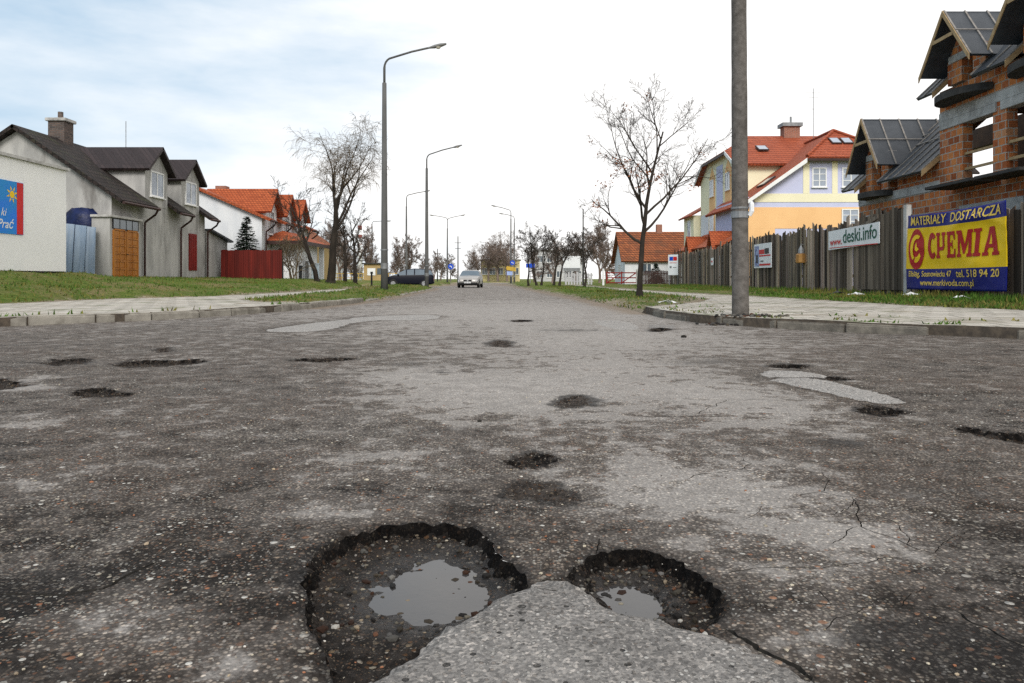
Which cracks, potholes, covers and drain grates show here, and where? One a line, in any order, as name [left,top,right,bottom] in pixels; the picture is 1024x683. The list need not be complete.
crack [688,445,984,573]
pothole [954,426,1024,444]
pothole [554,395,594,408]
pothole [300,522,528,683]
pothole [855,405,912,417]
pothole [500,451,561,470]
pothole [72,388,133,398]
pothole [566,549,731,633]
pothole [0,379,29,390]
pothole [39,358,91,366]
crack [799,586,938,629]
crack [956,611,1024,647]
